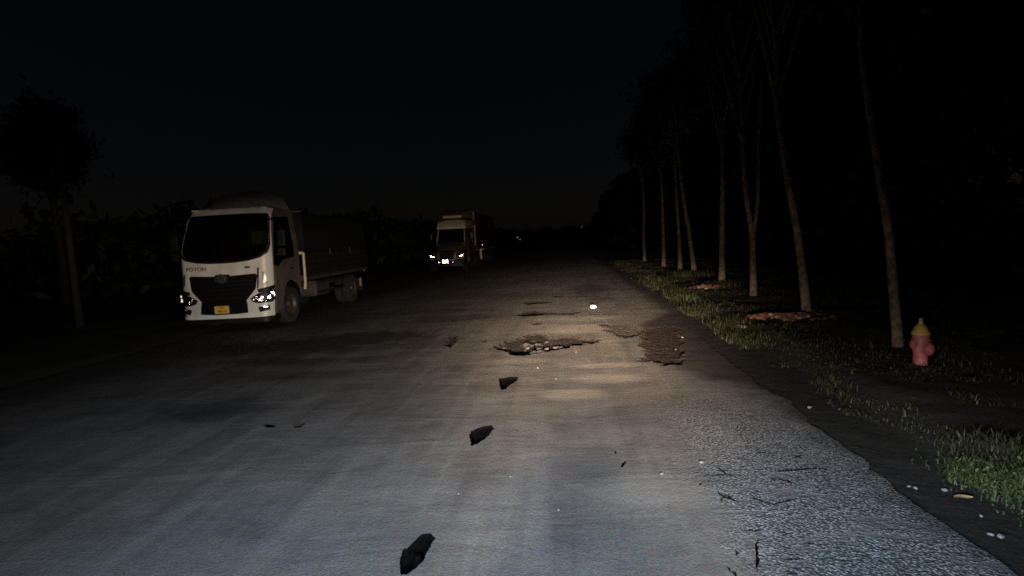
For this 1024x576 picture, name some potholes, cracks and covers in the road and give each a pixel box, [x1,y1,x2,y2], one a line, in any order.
pothole [444,334,458,347]
crack [699,451,829,505]
pothole [469,425,495,446]
pothole [400,533,436,575]
crack [726,529,761,576]
pothole [637,325,692,366]
pothole [600,324,645,338]
pothole [499,377,518,390]
pothole [493,333,602,356]
